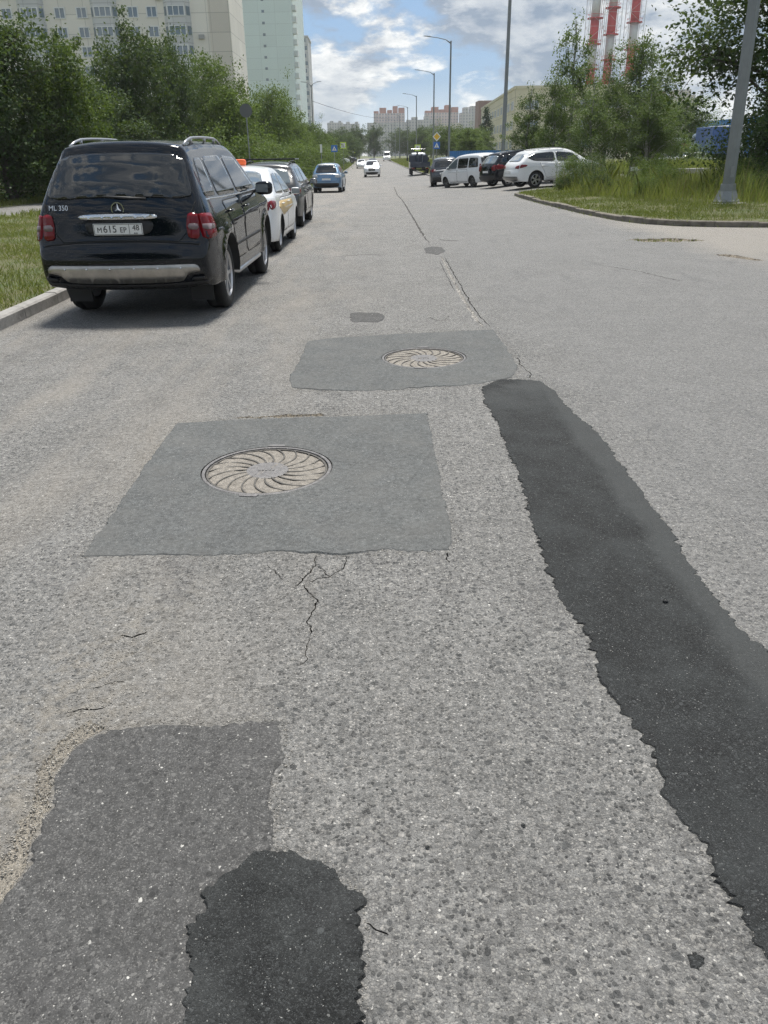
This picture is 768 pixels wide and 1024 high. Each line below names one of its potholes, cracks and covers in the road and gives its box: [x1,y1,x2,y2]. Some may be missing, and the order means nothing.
manhole cover [201,444,332,497]
manhole cover [382,347,466,369]
crack [267,557,347,667]
